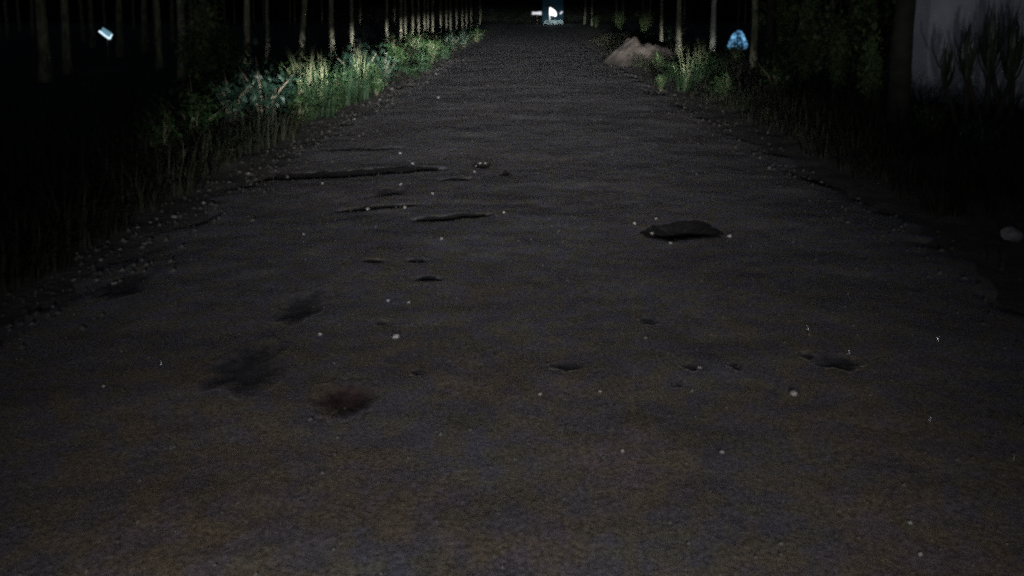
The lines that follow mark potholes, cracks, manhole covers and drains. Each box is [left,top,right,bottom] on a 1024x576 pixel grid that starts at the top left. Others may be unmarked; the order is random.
pothole [640,221,724,242]
pothole [192,334,297,401]
pothole [269,285,332,328]
pothole [305,378,387,423]
pothole [544,359,592,373]
pothole [370,186,409,199]
pothole [809,351,869,373]
